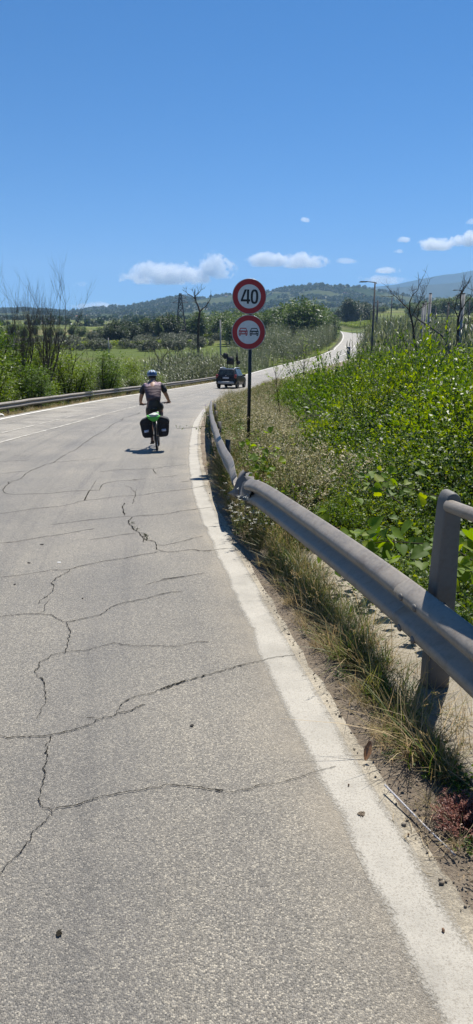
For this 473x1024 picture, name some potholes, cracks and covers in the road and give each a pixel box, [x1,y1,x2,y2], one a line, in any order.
crack [0,412,225,612]
crack [5,573,209,717]
crack [0,655,335,876]
